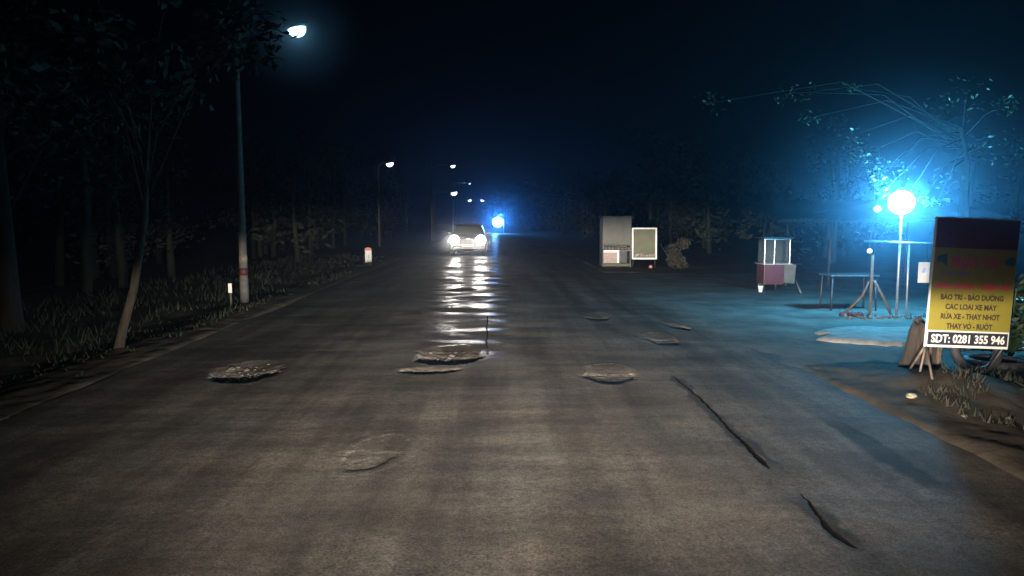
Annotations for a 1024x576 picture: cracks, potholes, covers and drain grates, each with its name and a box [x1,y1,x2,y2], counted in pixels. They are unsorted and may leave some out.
pothole [634,331,687,347]
crack [666,375,782,471]
crack [788,490,876,552]
pothole [571,362,648,386]
pothole [196,359,295,385]
pothole [657,322,698,332]
pothole [404,344,499,369]
pothole [388,365,473,377]
pothole [577,312,617,322]
